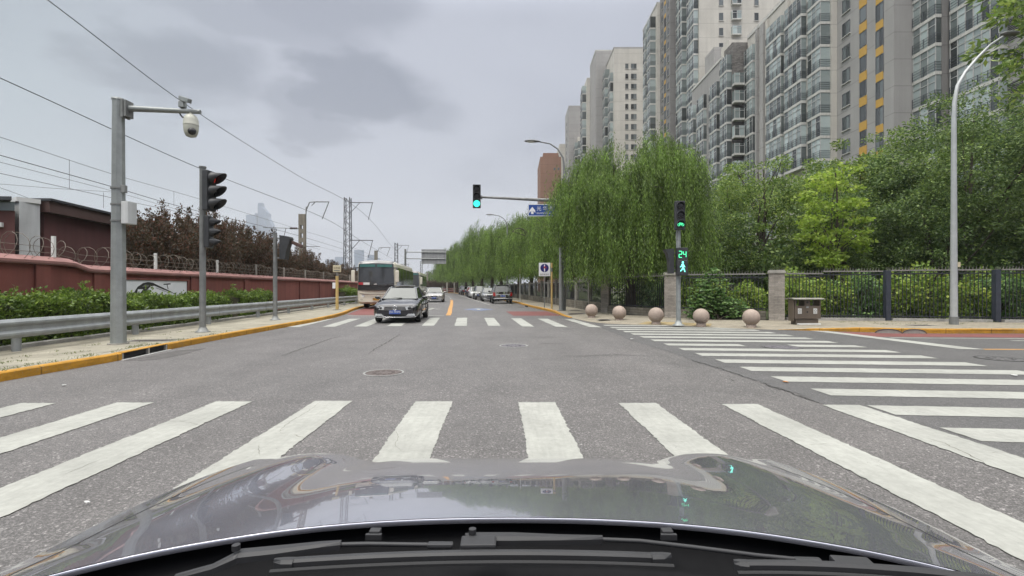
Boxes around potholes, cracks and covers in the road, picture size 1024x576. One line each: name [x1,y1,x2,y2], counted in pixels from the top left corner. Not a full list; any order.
drain grate [105,344,171,360]
